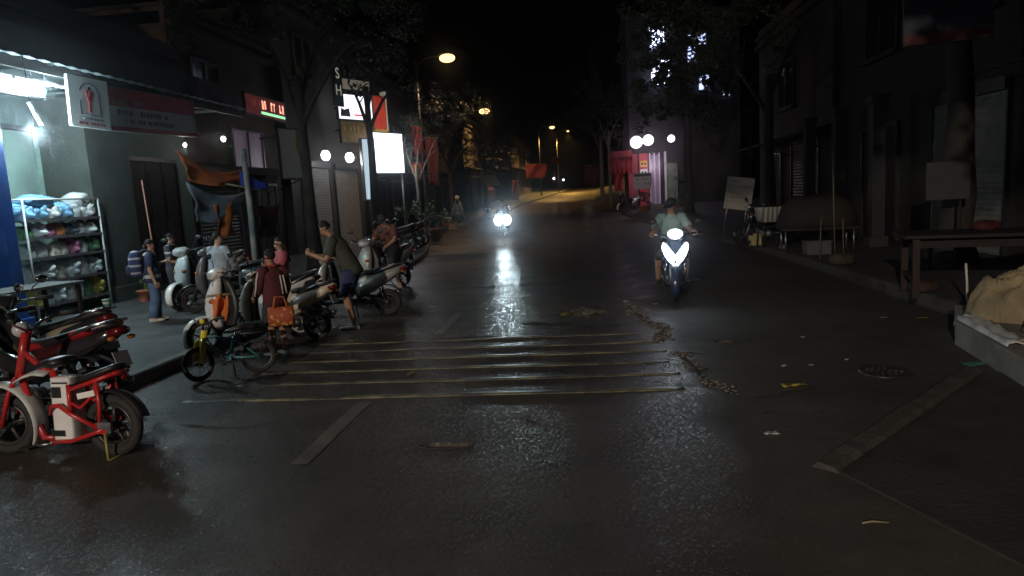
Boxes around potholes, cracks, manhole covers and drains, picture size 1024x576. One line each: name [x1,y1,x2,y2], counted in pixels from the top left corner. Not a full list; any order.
manhole cover [858,365,910,378]
